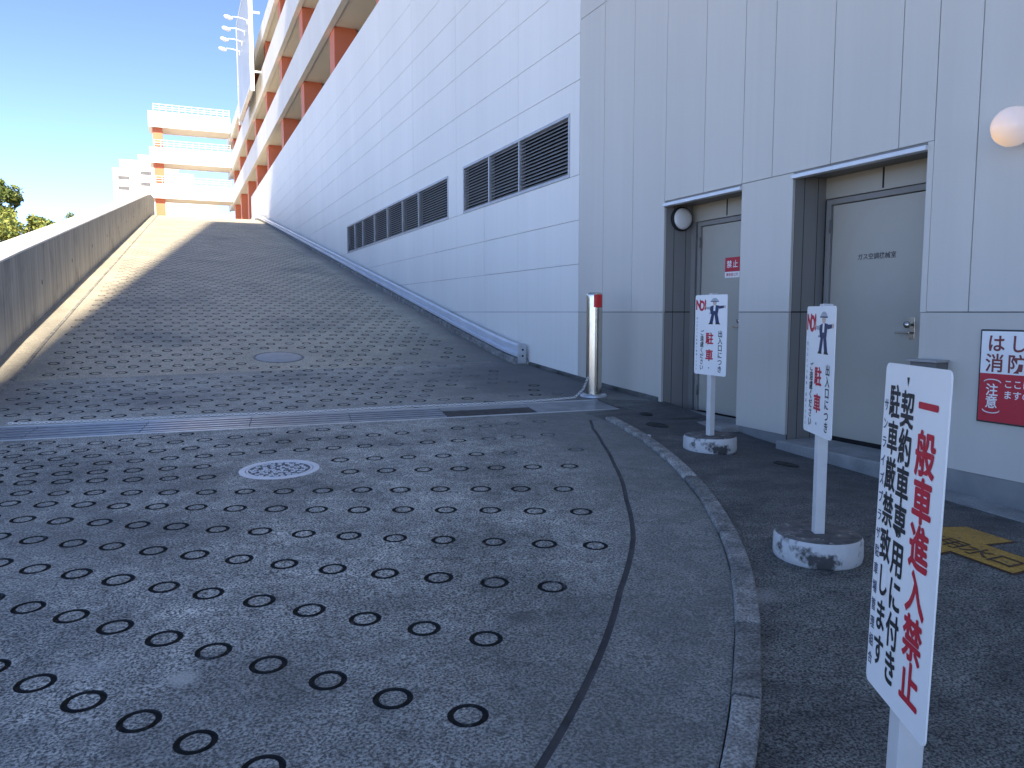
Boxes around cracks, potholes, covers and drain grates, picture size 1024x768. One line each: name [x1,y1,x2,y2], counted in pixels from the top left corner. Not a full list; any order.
manhole cover [253,352,304,363]
manhole cover [239,460,319,480]
